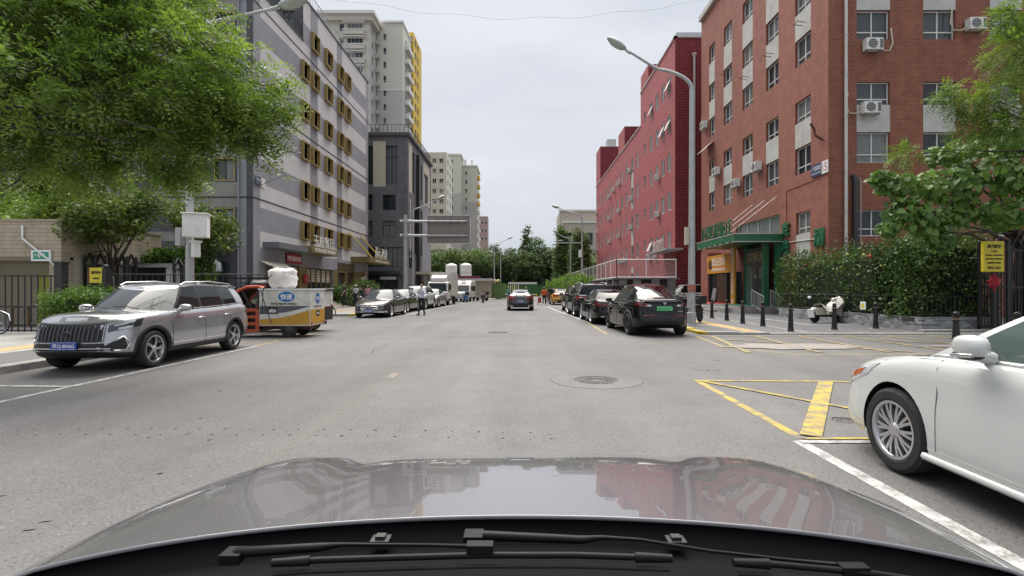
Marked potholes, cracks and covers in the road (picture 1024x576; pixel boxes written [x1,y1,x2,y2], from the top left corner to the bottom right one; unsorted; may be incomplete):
manhole cover [551,373,643,389]
